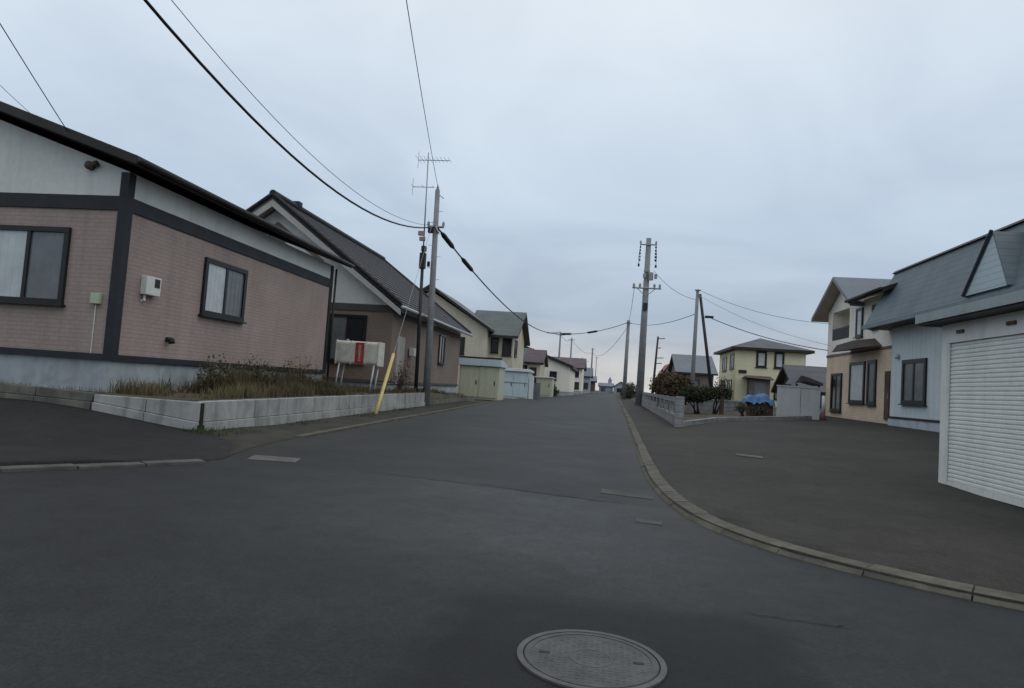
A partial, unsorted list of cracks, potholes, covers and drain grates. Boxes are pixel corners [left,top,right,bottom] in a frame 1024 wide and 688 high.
manhole cover [517,629,667,688]
